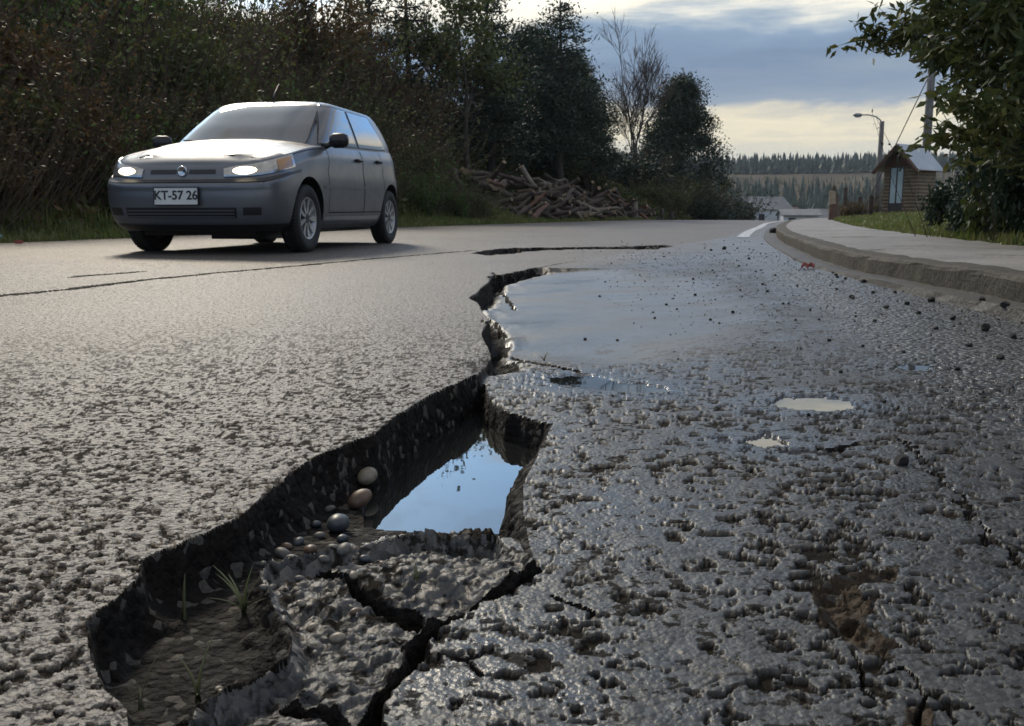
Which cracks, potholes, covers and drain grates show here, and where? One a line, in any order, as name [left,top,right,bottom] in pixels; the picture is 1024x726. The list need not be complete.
crack [279,559,596,726]
pothole [85,375,553,726]
pothole [810,566,902,659]
crack [849,649,975,726]
crack [889,432,1024,571]
